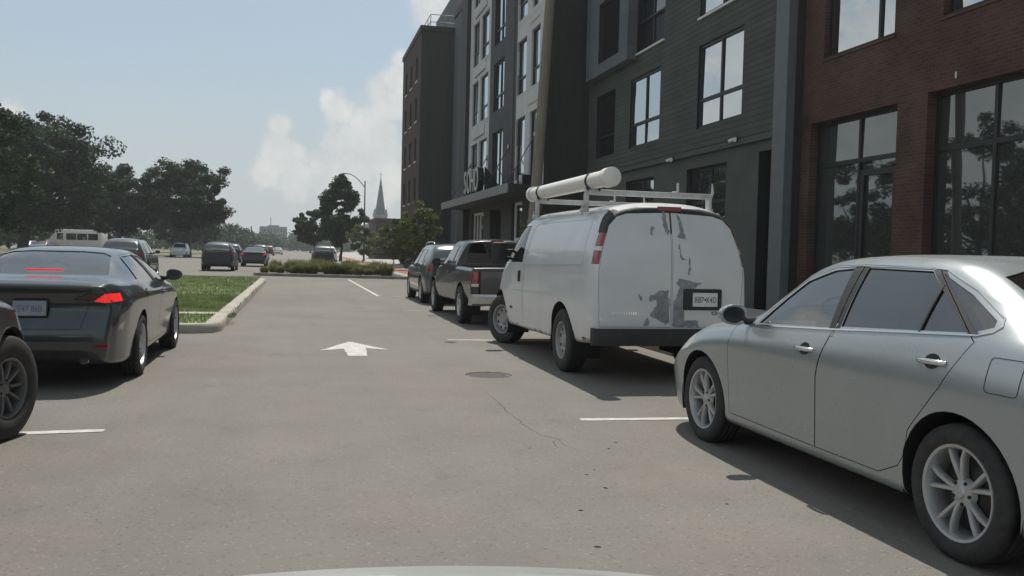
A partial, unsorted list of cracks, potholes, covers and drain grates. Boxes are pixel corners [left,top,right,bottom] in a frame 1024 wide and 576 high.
manhole cover [462,371,515,379]
